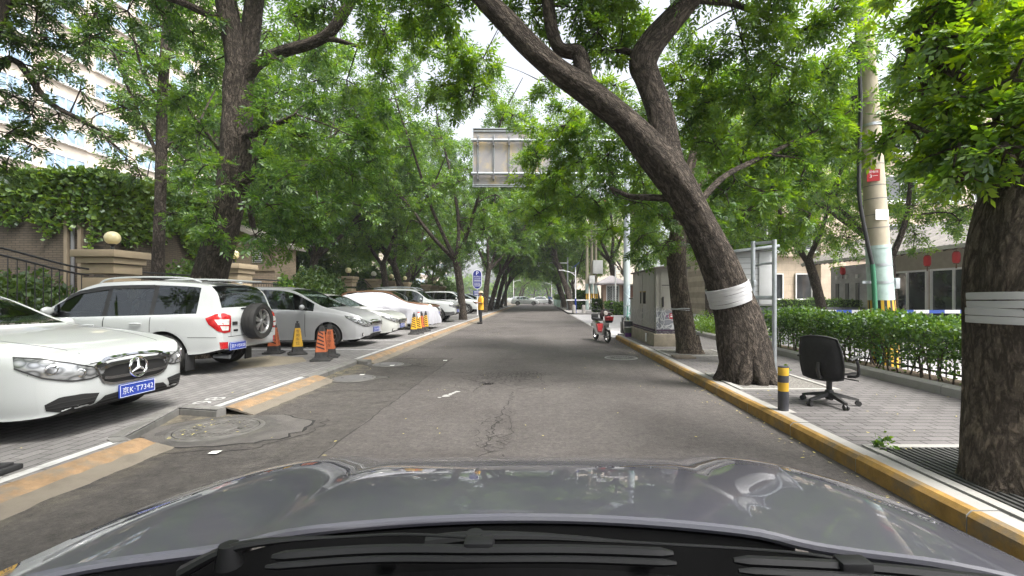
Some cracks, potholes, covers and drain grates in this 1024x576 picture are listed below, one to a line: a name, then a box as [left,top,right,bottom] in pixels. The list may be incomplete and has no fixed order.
crack [409,362,569,457]
manhole cover [139,414,316,448]
manhole cover [329,374,389,383]
